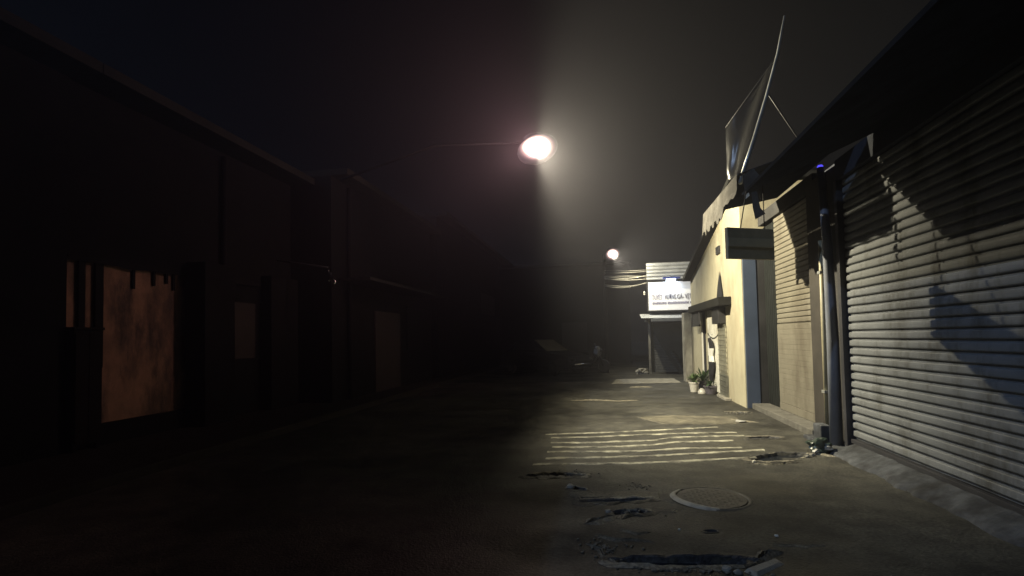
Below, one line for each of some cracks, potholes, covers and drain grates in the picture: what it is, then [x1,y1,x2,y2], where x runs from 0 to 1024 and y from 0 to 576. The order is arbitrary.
pothole [605,508,657,519]
pothole [597,553,766,572]
pothole [572,495,661,507]
pothole [519,471,592,480]
manhole cover [670,487,753,511]
pothole [741,451,813,463]
